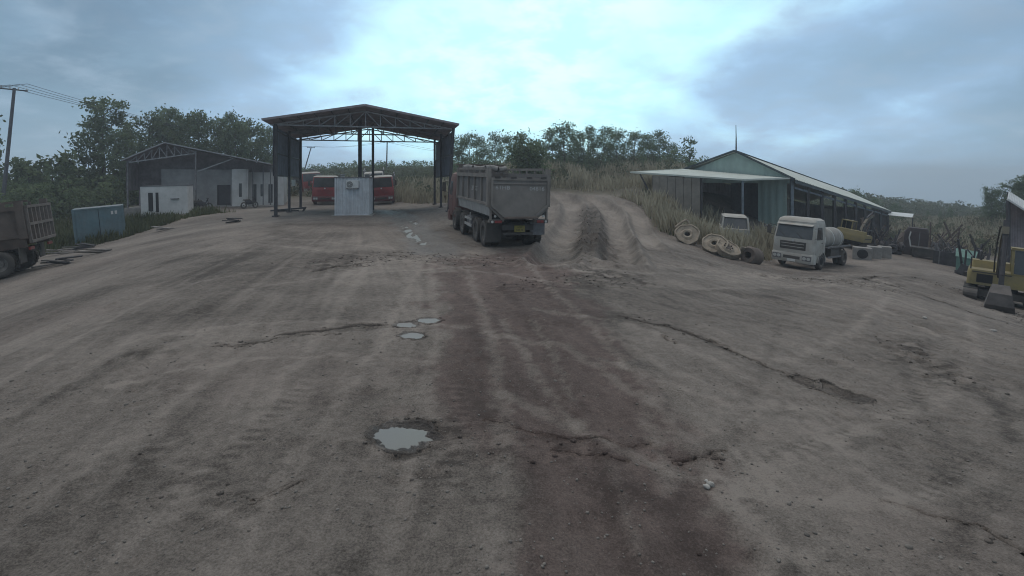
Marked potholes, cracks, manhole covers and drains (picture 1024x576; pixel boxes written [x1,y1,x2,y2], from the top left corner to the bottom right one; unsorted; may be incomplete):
crack [208,323,389,349]
pothole [363,419,444,456]
crack [877,498,1024,556]
pothole [390,320,422,328]
crack [618,315,793,378]
crack [671,449,726,465]
pothole [415,317,444,325]
crack [485,418,651,464]
pothole [784,372,822,390]
pothole [397,331,426,341]
